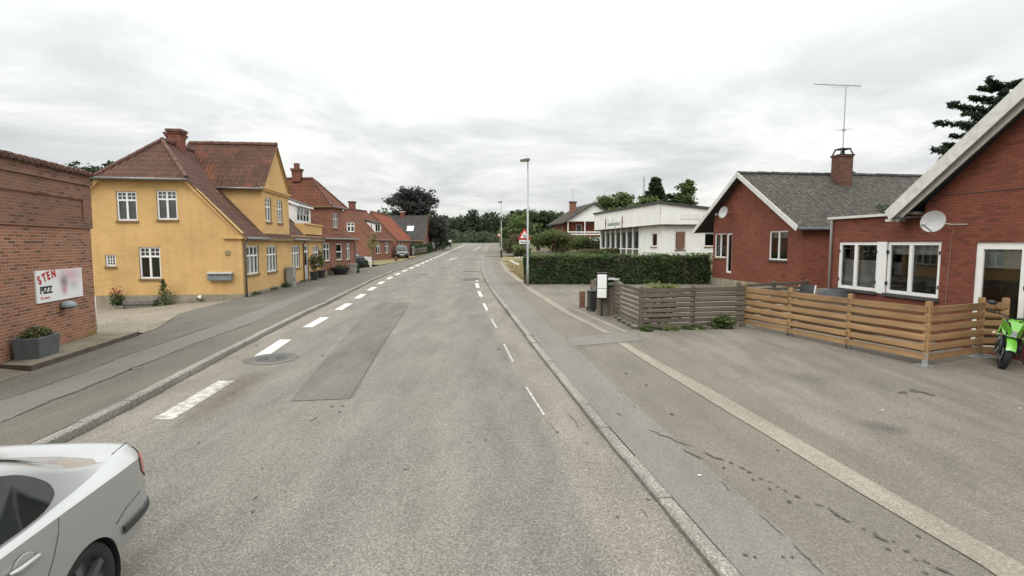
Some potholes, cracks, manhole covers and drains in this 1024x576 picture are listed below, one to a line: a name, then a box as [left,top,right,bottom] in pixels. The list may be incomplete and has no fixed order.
crack [651,430,953,575]
manhole cover [242,353,299,365]
